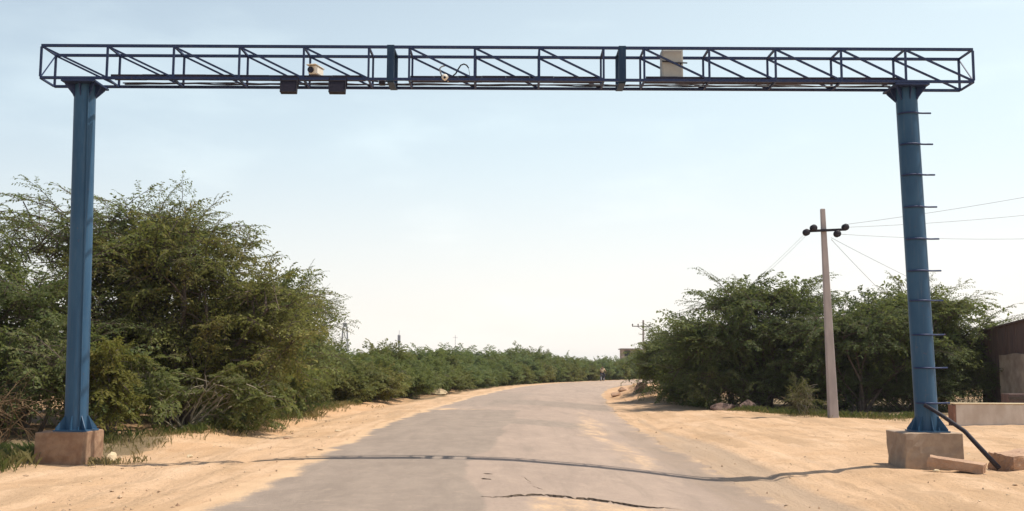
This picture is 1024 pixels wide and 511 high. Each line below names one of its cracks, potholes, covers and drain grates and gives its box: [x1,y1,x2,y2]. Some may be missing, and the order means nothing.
crack [481,473,672,509]
